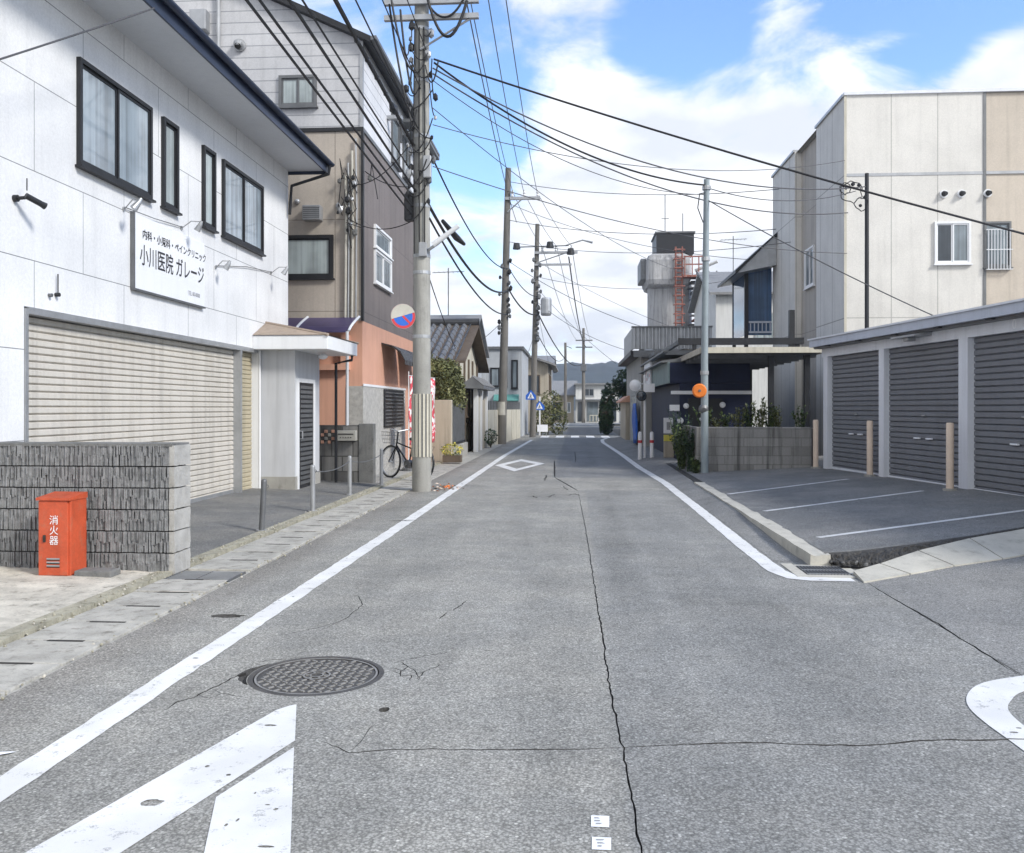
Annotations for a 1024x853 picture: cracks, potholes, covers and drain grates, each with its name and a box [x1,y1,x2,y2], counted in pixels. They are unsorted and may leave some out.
manhole cover [247,656,384,696]
crack [393,652,454,681]
crack [321,724,1022,753]
drain grate [796,565,852,575]
crack [152,657,299,712]
